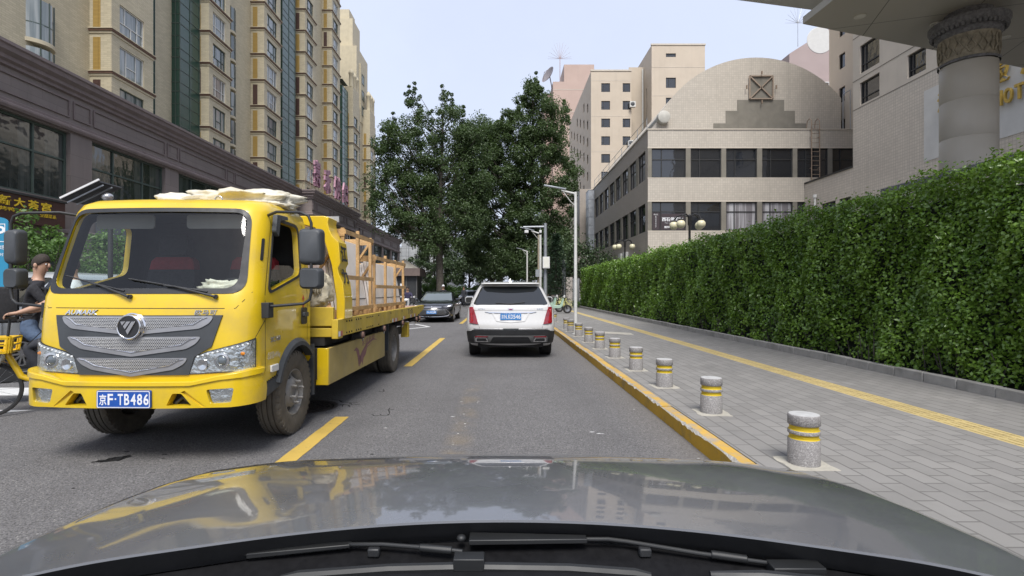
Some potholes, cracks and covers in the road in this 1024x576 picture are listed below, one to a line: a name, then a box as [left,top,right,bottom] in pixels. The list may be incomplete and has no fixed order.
crack [319,389,394,416]
pothole [91,455,132,463]
